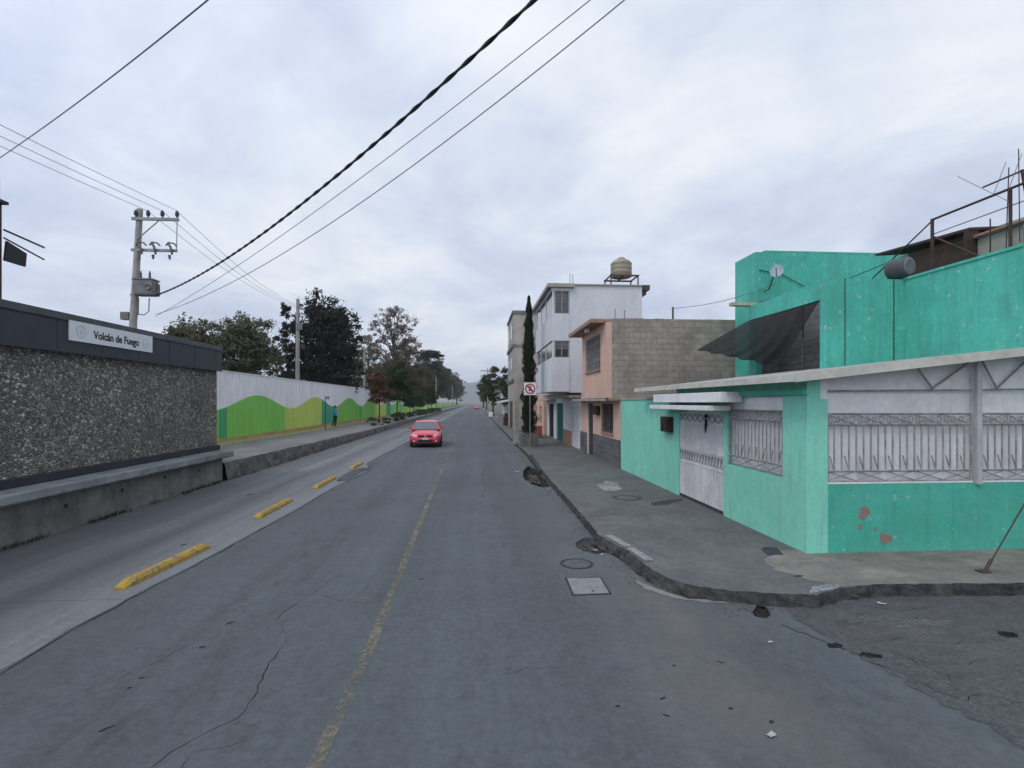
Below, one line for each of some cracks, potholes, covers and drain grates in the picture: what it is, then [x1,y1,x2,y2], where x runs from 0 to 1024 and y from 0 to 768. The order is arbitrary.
crack [782,617,1023,703]
manhole cover [565,577,612,596]
pothole [575,538,605,554]
pothole [753,605,771,619]
pothole [523,466,550,488]
crack [151,573,451,768]
manhole cover [560,558,593,569]
